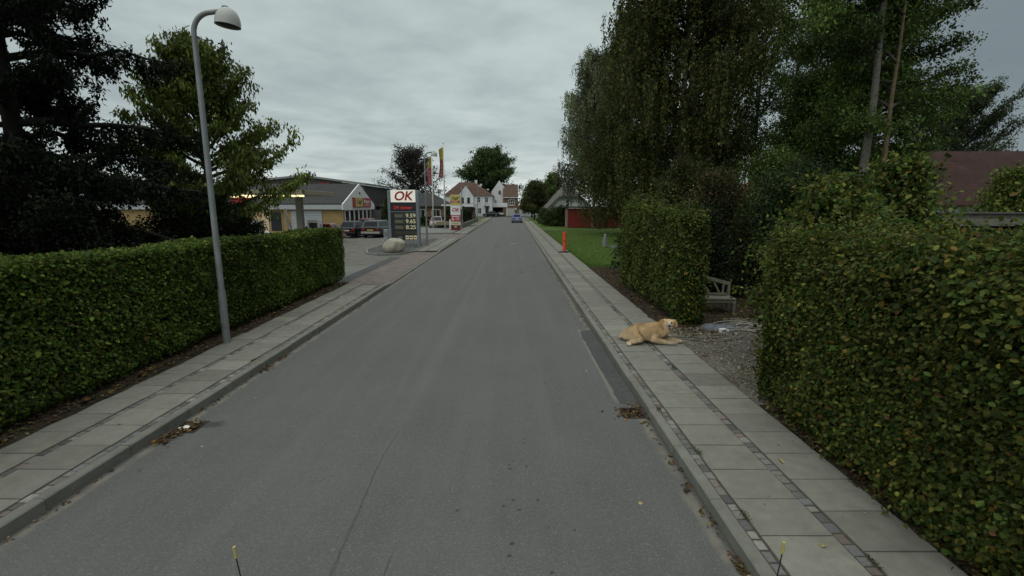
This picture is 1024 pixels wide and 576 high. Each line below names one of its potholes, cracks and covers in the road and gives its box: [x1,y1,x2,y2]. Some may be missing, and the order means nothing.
crack [329,434,397,576]
